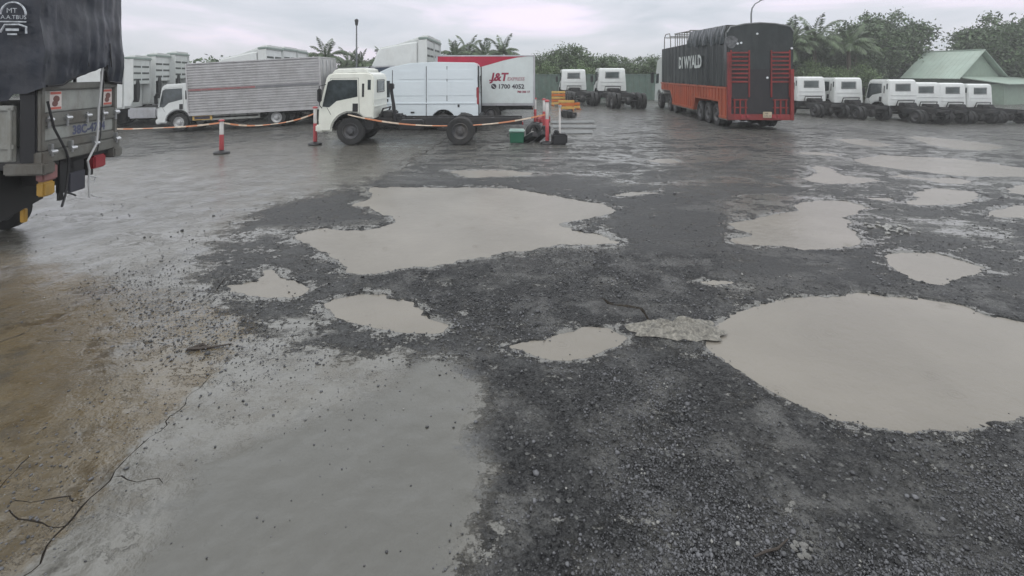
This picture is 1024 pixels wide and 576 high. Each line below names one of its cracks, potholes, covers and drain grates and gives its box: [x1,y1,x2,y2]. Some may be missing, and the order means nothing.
pothole [881,250,986,286]
pothole [320,291,451,335]
pothole [725,198,870,250]
pothole [224,265,312,298]
pothole [507,324,630,361]
crack [601,298,650,320]
pothole [901,187,981,205]
pothole [851,154,1024,177]
pothole [702,291,1024,434]
pothole [799,165,882,184]
pothole [292,185,626,275]
